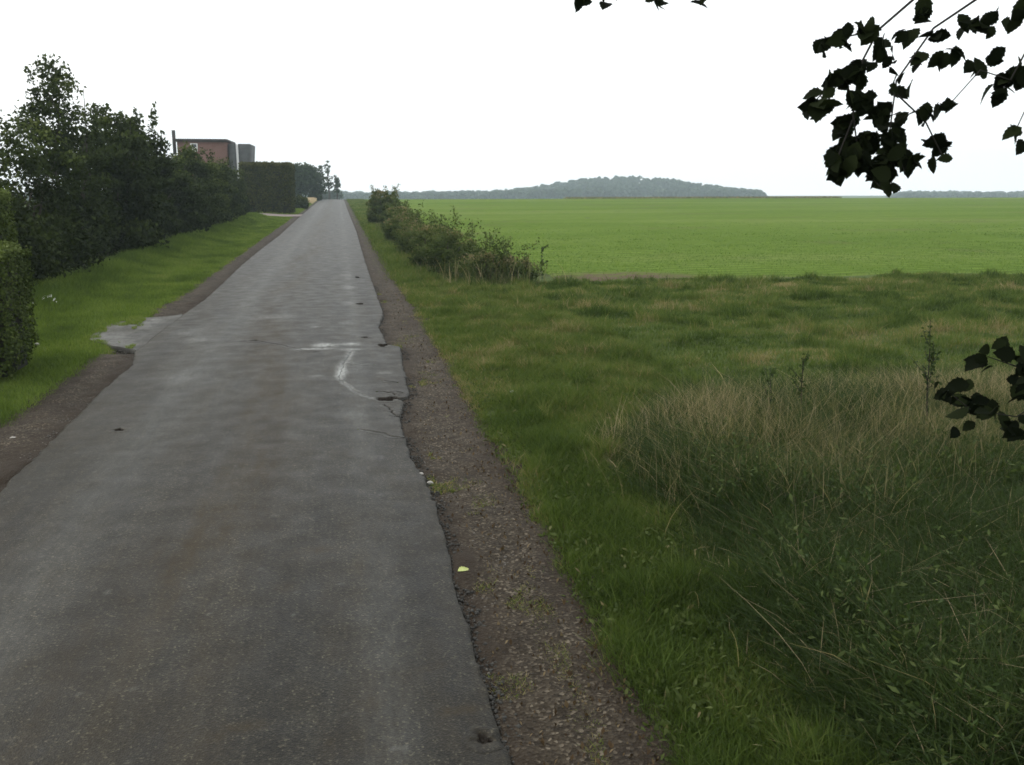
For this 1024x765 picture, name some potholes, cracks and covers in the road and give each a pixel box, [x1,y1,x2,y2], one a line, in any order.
crack [241,340,404,439]
pothole [461,725,504,754]
